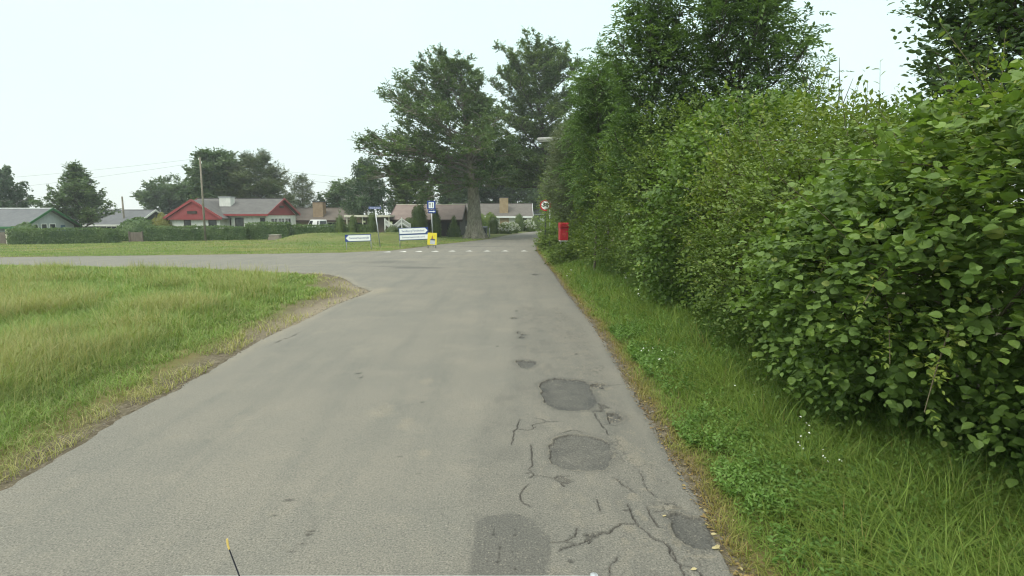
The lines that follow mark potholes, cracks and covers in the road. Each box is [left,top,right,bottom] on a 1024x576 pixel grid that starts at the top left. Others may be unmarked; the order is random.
pothole [605,412,625,424]
crack [509,384,706,576]
